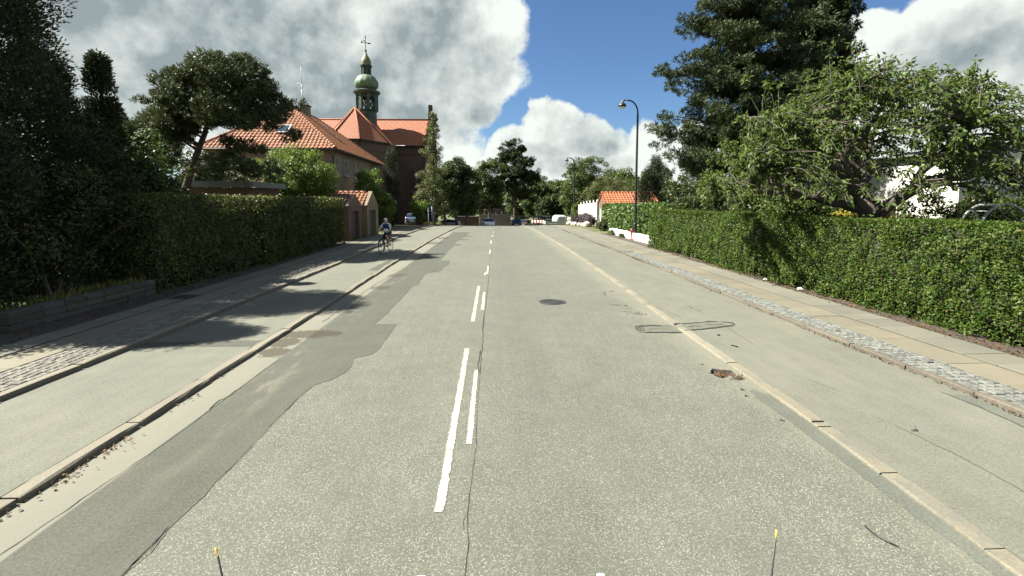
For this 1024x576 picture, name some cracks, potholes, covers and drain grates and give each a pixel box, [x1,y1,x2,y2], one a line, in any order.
crack [463,234,494,576]
